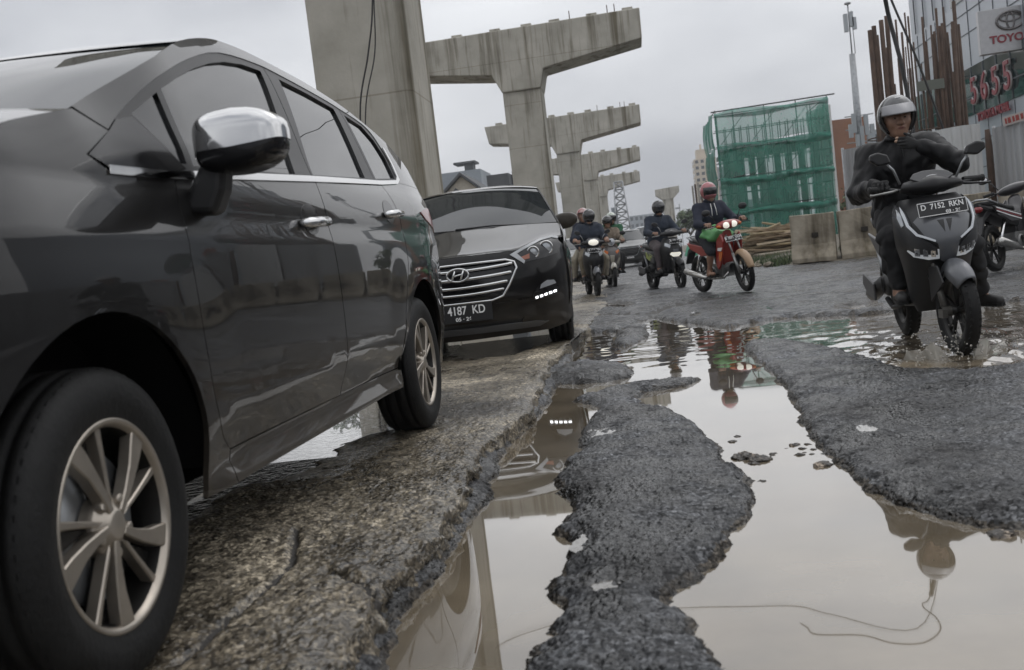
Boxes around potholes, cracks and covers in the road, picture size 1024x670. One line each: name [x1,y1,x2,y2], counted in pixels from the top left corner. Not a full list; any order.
pothole [376,398,601,670]
crack [182,529,300,664]
pothole [742,296,1024,369]
pothole [571,315,1024,670]
pothole [545,315,654,404]
